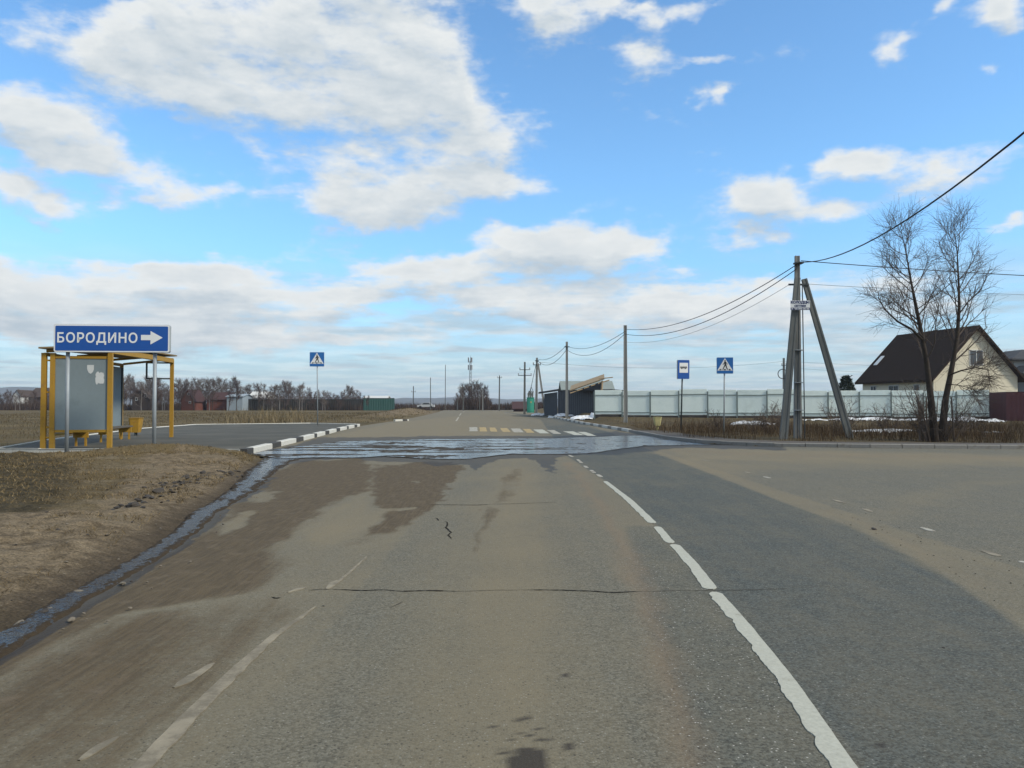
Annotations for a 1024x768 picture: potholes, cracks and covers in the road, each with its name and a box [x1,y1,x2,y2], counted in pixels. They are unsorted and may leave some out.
crack [273,588,790,606]
crack [429,502,548,539]
